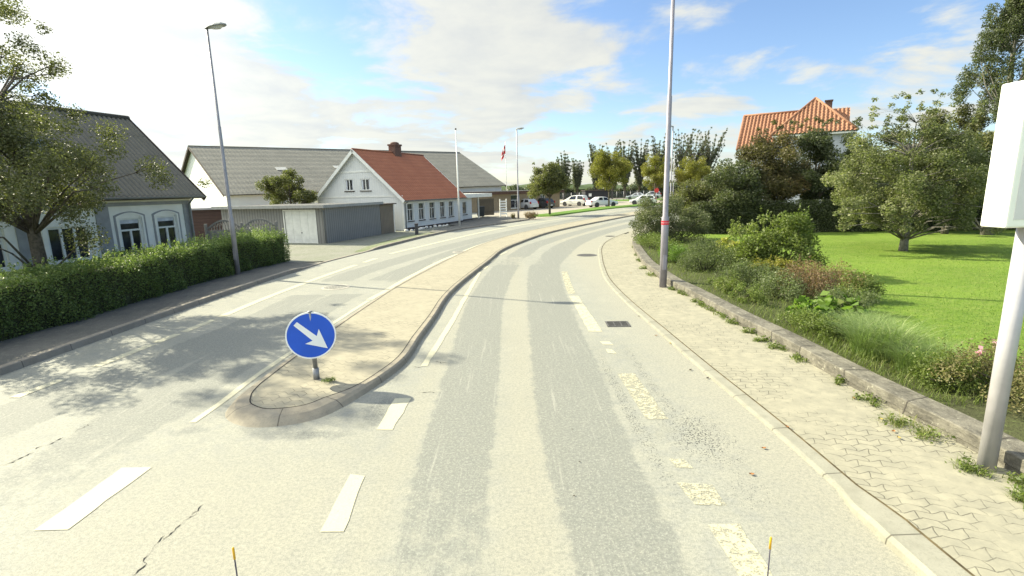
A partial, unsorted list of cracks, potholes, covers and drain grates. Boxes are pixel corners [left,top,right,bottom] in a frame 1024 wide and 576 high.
crack [133,505,202,576]
